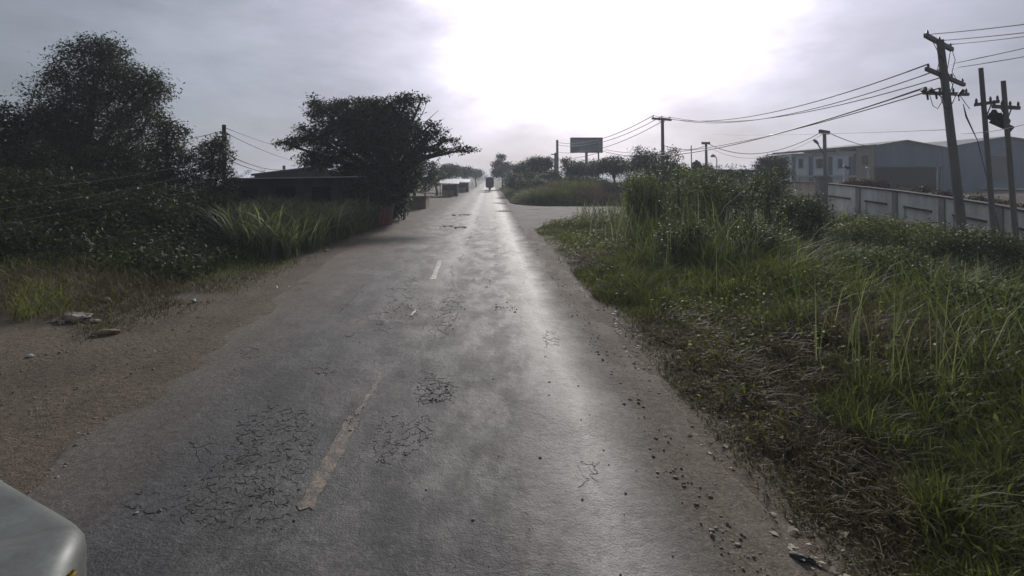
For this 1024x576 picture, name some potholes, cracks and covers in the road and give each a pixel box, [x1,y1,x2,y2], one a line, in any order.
crack [165,405,317,532]
crack [578,461,598,487]
crack [421,294,462,341]
crack [373,369,458,463]
crack [339,277,423,337]
crack [125,489,159,516]
